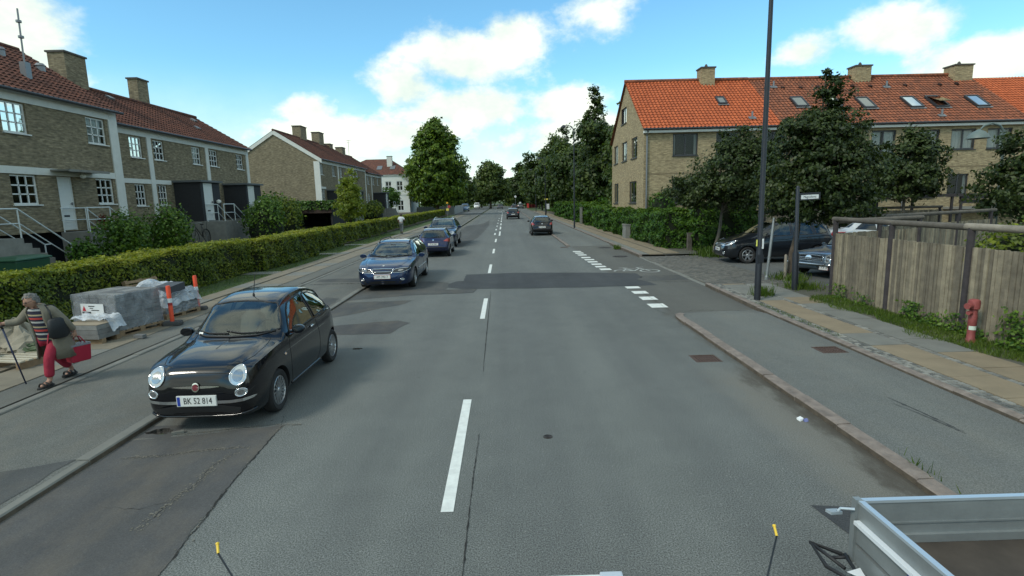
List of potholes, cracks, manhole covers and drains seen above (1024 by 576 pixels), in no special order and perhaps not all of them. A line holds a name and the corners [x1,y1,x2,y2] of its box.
pothole [135,425,186,439]
crack [119,416,305,576]
